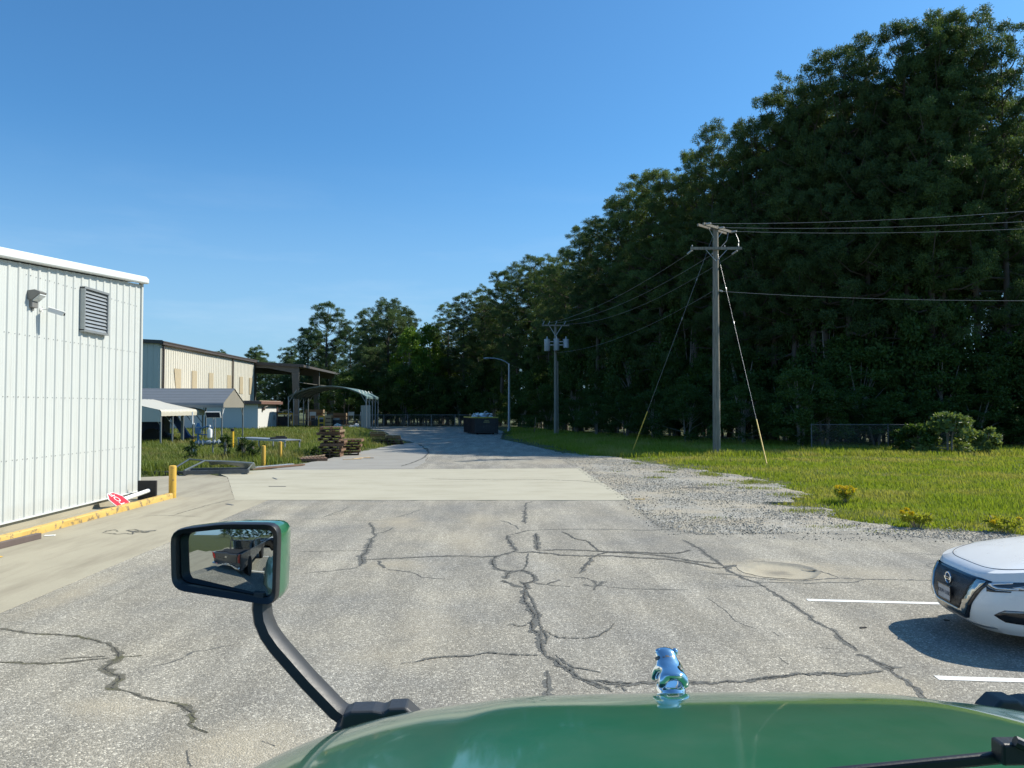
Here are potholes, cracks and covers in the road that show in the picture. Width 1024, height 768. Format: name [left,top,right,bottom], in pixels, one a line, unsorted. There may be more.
crack [0,628,229,733]
crack [375,501,931,696]
crack [304,507,441,579]
